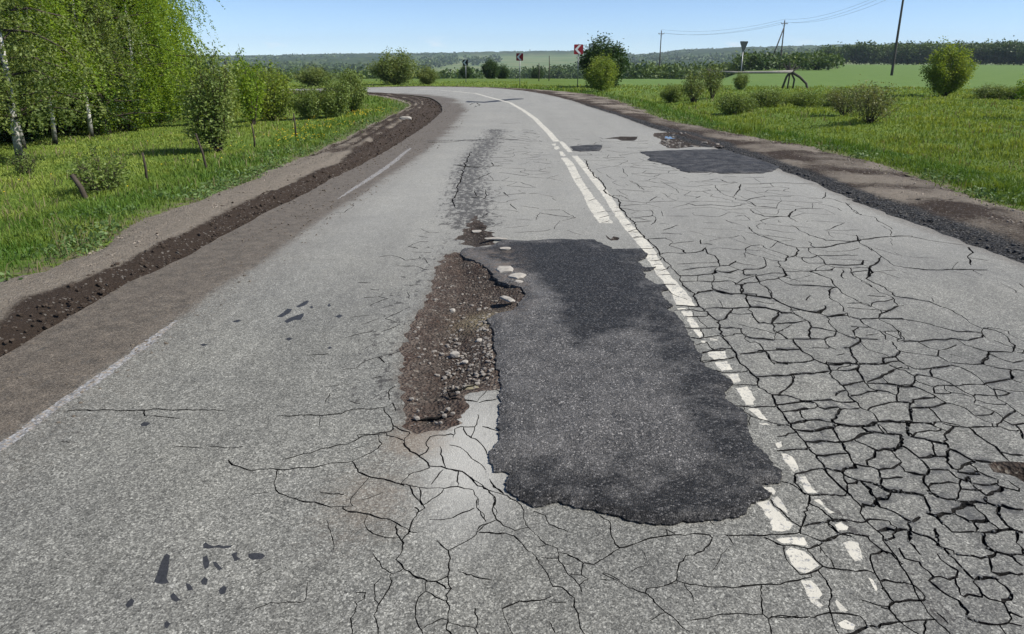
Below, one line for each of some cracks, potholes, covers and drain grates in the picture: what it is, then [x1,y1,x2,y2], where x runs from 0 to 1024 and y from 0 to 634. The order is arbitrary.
crack [865,449,880,471]
crack [771,394,814,403]
crack [252,461,353,471]
crack [395,524,404,560]
crack [824,463,870,473]
crack [973,521,1014,534]
pothole [398,252,525,434]
crack [926,503,973,519]
crack [867,401,908,411]
crack [805,432,874,444]
crack [567,548,619,565]
crack [910,402,946,410]
